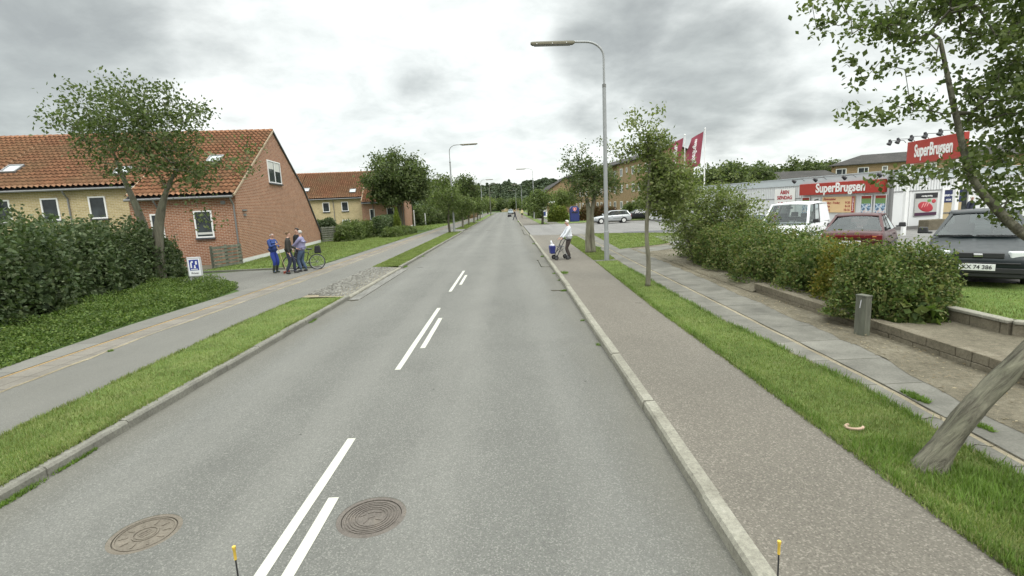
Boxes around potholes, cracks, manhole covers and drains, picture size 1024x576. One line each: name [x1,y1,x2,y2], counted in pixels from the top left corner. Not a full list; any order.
manhole cover [105,514,183,555]
manhole cover [336,497,406,538]
